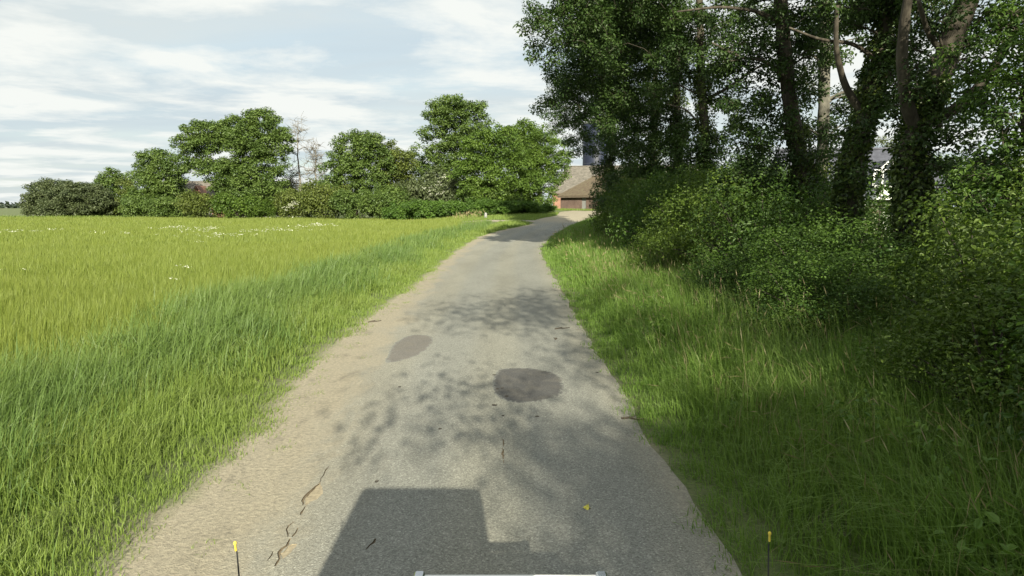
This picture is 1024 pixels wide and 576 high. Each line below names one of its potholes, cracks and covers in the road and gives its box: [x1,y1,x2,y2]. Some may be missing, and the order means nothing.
crack [267,466,329,566]
